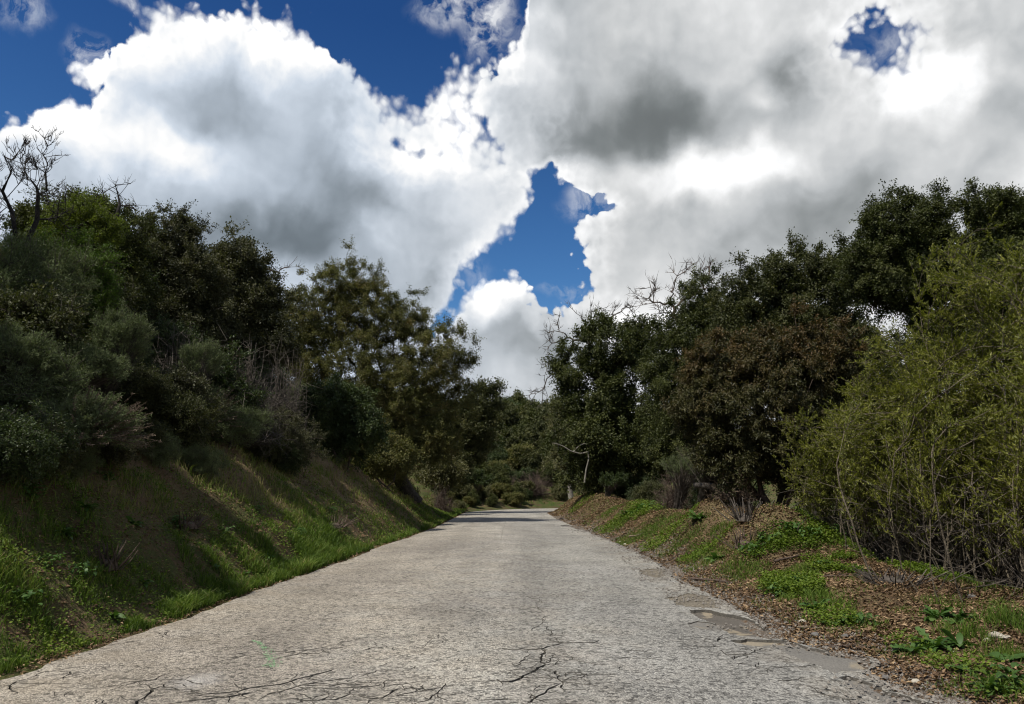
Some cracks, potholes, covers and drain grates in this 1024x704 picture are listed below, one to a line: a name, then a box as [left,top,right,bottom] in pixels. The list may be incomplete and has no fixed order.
pothole [730,639,872,674]
crack [7,596,660,704]
pothole [690,610,764,637]
pothole [639,568,668,578]
pothole [666,593,720,608]
